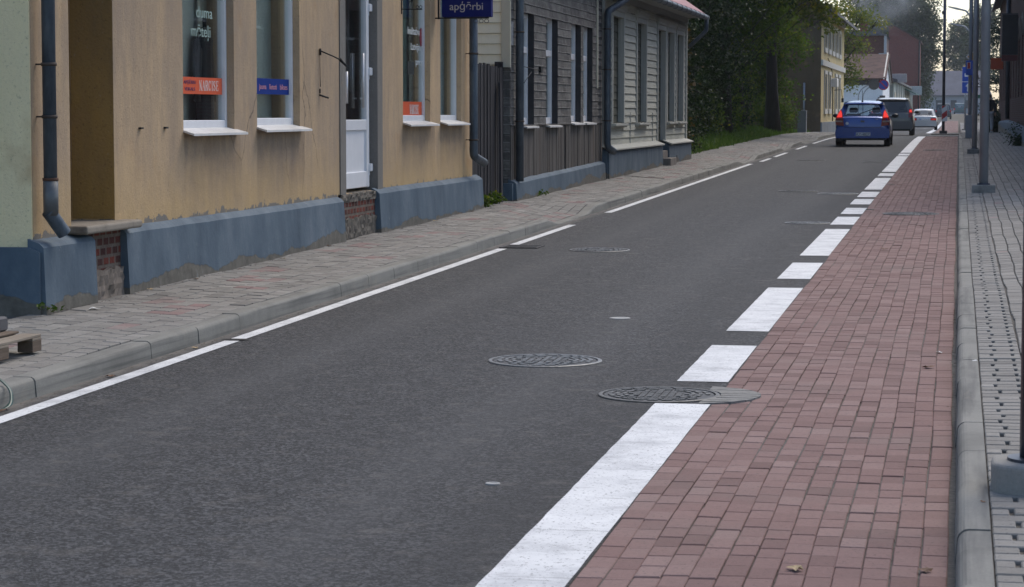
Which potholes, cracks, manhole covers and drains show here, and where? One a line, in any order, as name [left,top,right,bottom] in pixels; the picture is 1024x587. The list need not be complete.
manhole cover [598,386,761,404]
manhole cover [488,354,602,368]
